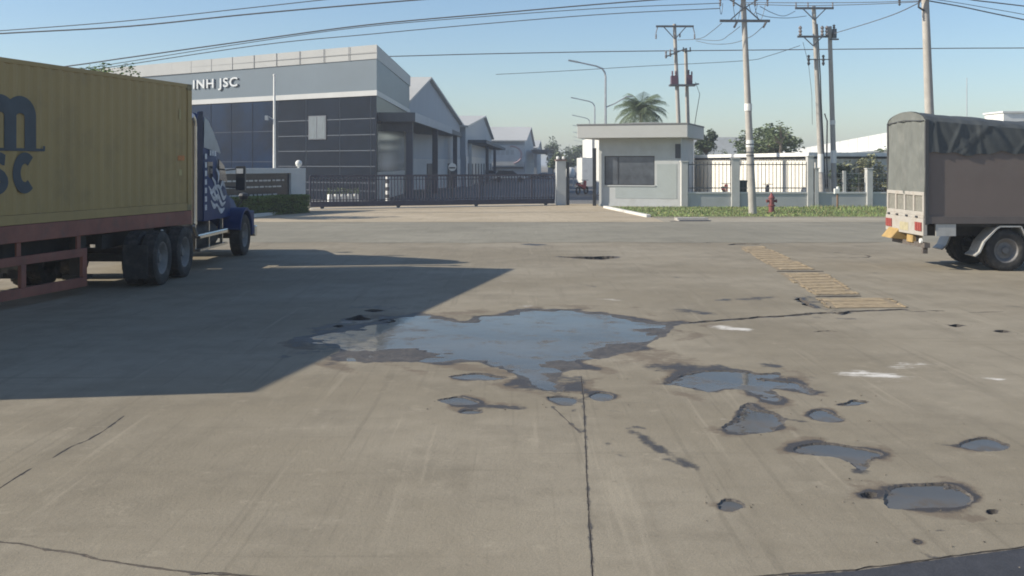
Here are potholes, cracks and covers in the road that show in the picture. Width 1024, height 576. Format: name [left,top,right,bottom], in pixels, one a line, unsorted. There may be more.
pothole [438,396,479,405]
pothole [793,442,884,471]
pothole [547,396,578,405]
crack [690,295,936,332]
pothole [807,409,844,422]
pothole [721,403,786,434]
pothole [957,437,1010,451]
pothole [293,309,681,393]
pothole [589,392,614,401]
pothole [664,370,816,402]
pothole [883,483,974,509]
